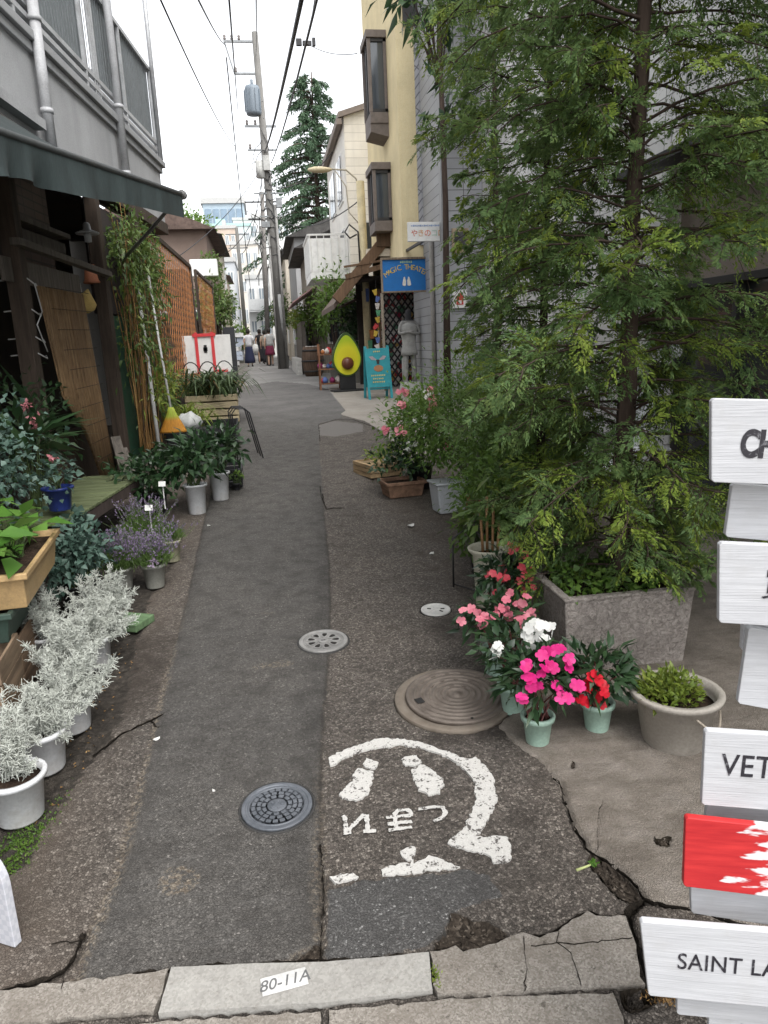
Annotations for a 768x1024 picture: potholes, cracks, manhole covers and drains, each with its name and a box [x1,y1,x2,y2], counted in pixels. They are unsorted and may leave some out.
manhole cover [238,782,316,834]
manhole cover [420,603,452,617]
crack [92,714,163,757]
manhole cover [395,669,510,735]
crack [2,932,86,990]
pothole [434,913,507,951]
